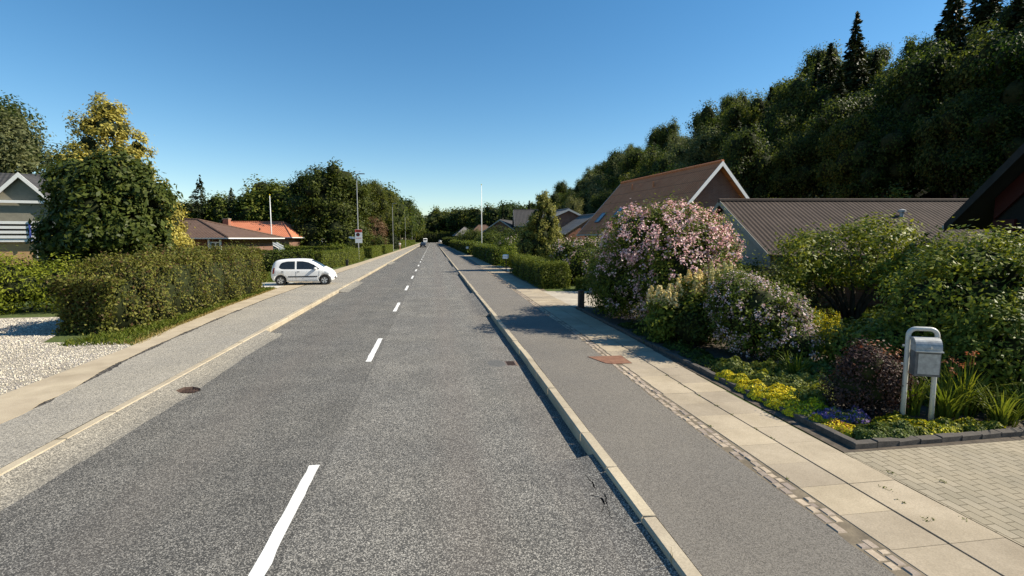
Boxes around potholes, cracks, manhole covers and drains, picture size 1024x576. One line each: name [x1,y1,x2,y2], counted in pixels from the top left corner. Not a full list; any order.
manhole cover [589,355,631,364]
